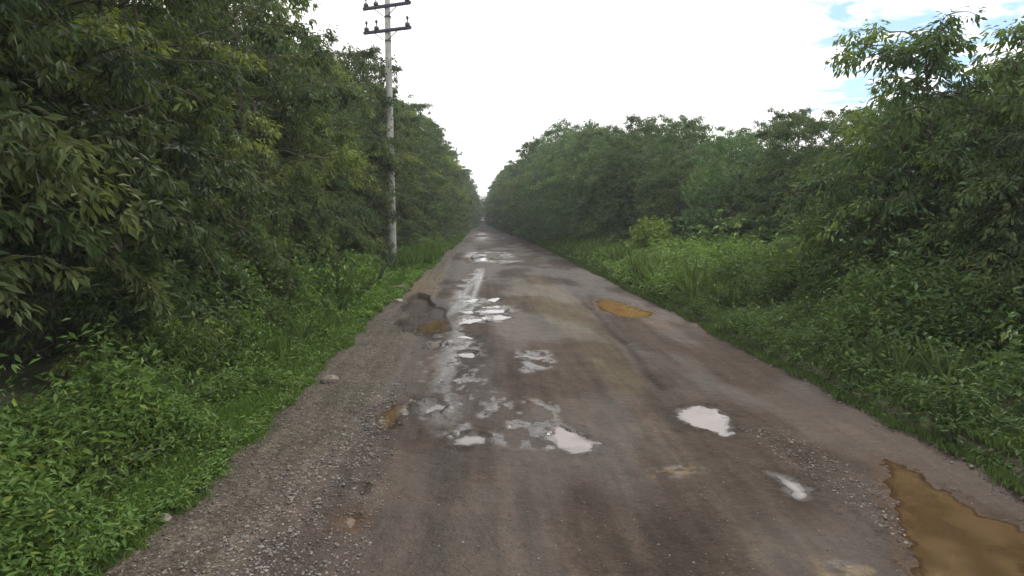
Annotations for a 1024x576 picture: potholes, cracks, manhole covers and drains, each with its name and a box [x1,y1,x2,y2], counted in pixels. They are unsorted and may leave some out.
pothole [393,292,454,336]
pothole [865,452,1024,576]
pothole [763,468,822,503]
pothole [370,396,418,432]
pothole [409,397,451,417]
pothole [670,403,740,438]
pothole [450,430,494,446]
pothole [545,419,604,457]
pothole [589,297,660,319]
